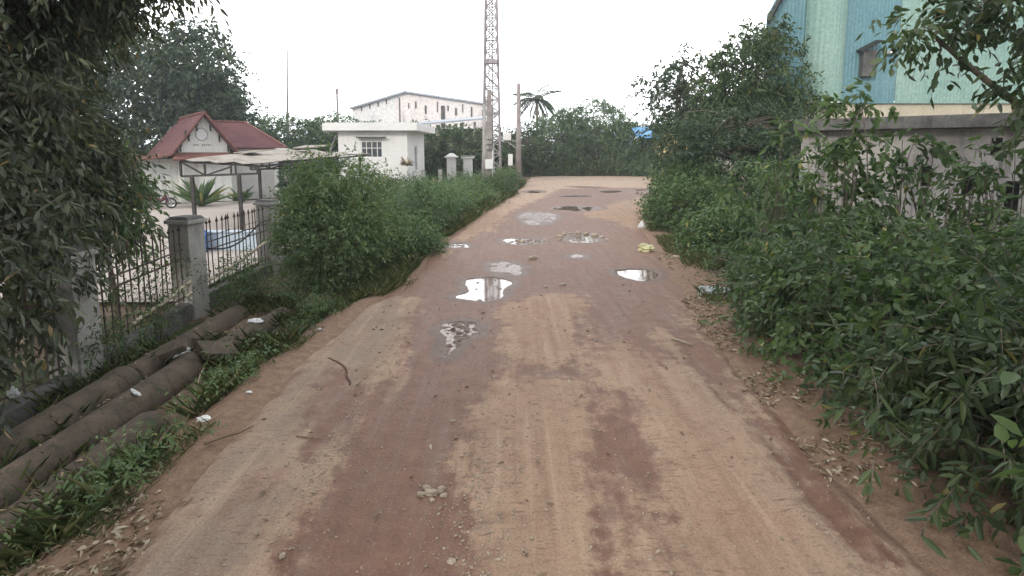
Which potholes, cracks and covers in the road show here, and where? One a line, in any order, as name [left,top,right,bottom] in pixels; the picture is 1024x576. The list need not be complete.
pothole [454,276,514,301]
pothole [614,268,661,281]
pothole [565,232,602,243]
pothole [487,261,524,275]
pothole [436,320,484,358]
pothole [517,211,560,226]
